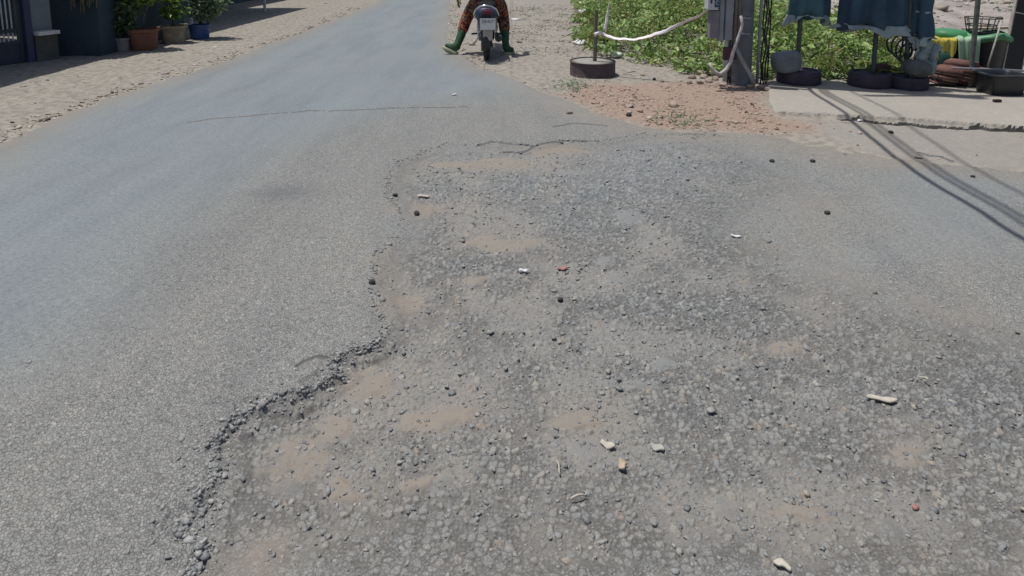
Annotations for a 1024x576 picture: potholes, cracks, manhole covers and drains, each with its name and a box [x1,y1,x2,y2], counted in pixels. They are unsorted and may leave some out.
pothole [177,133,1024,576]
crack [187,106,468,123]
crack [476,123,608,155]
